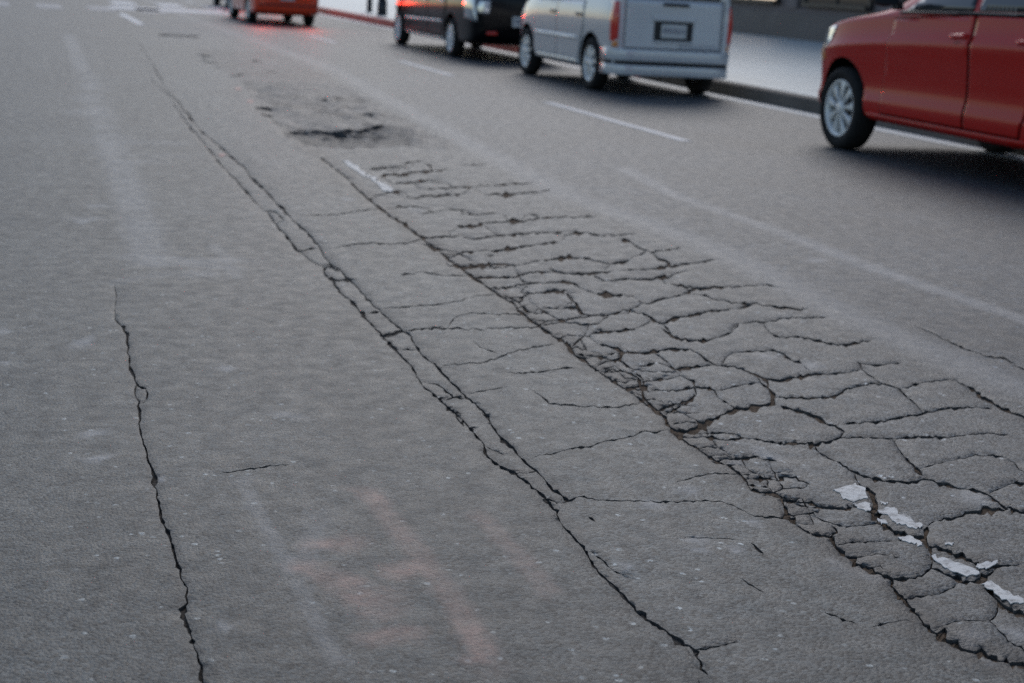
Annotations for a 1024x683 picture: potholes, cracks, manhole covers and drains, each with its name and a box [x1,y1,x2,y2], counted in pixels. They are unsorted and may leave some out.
crack [140,43,737,683]
pothole [283,124,415,149]
crack [321,158,1024,670]
crack [114,286,203,683]
